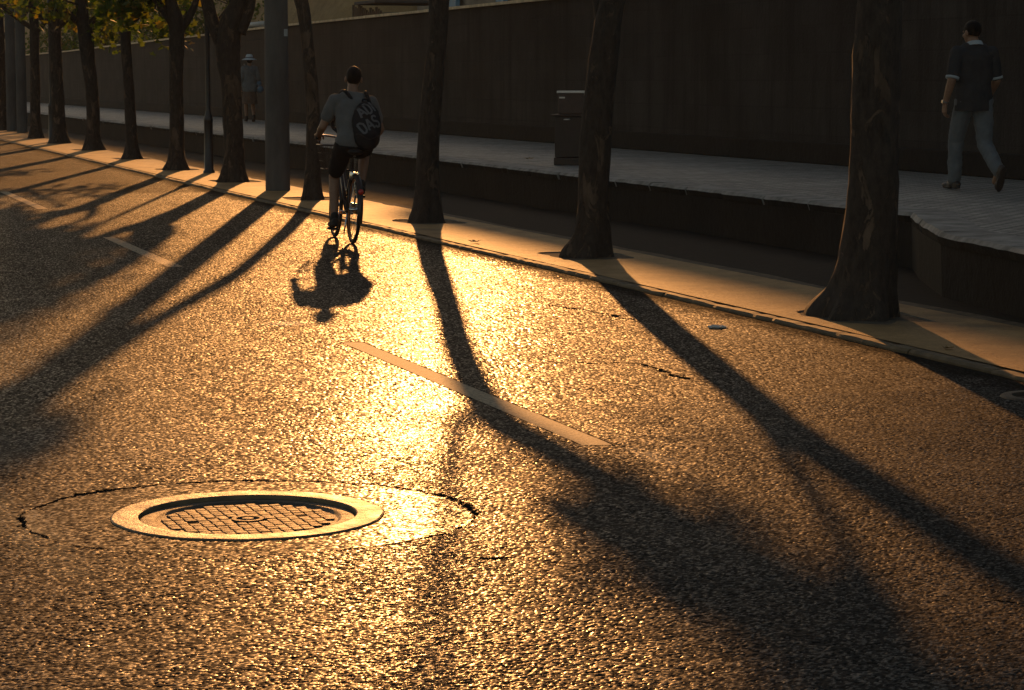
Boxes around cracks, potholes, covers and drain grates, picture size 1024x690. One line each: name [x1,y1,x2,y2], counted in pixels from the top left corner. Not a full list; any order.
crack [16,481,481,551]
crack [586,363,691,380]
manhole cover [111,491,384,541]
manhole cover [999,390,1024,401]
